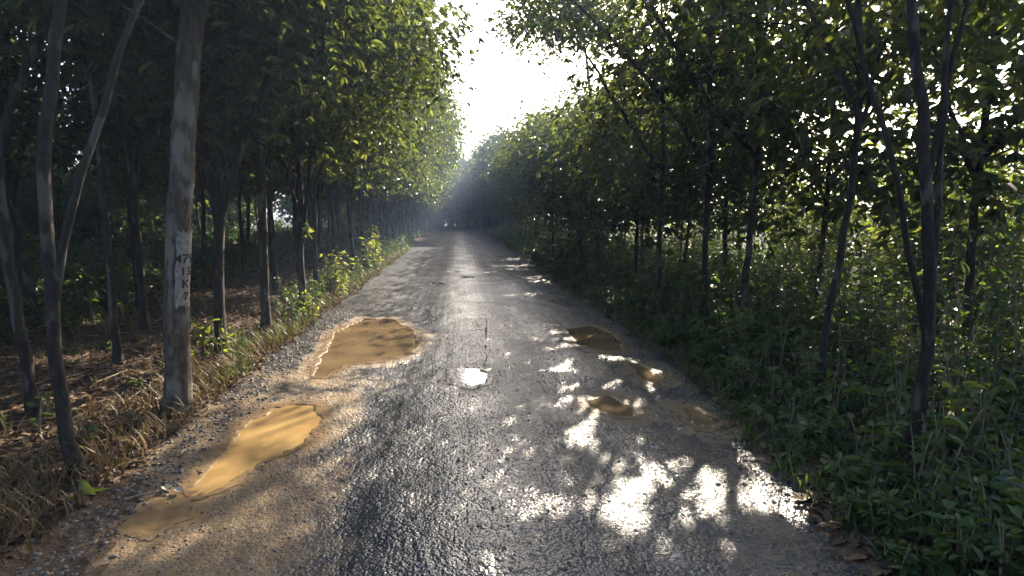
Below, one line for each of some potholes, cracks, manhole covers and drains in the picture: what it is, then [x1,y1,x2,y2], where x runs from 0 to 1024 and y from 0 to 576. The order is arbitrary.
pothole [182,401,329,500]
pothole [446,365,495,389]
pothole [560,324,629,353]
crack [471,313,492,371]
pothole [580,393,643,419]
